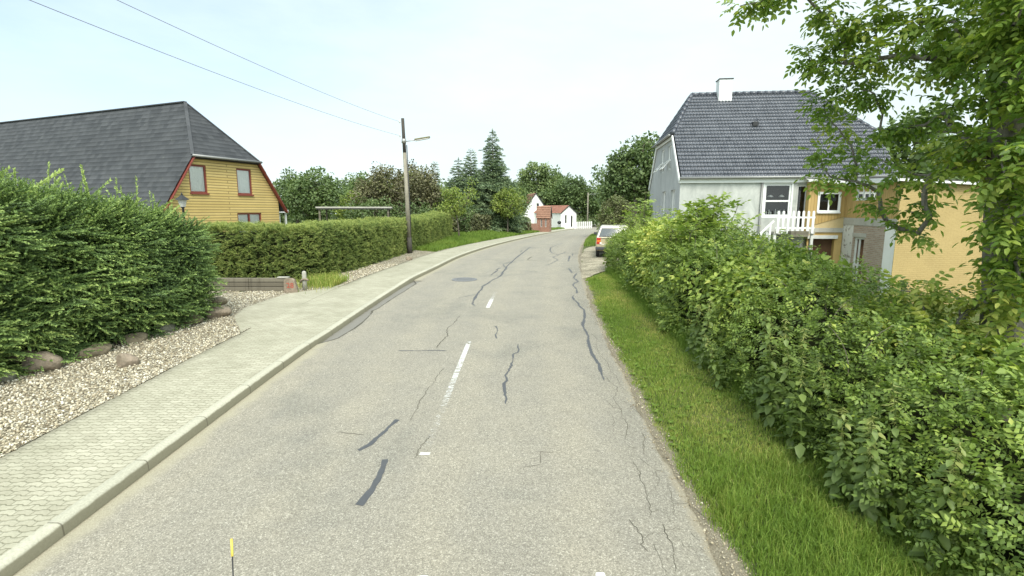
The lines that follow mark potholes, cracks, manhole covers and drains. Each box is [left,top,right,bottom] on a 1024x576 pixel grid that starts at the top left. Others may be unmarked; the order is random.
crack [585,311,712,572]
crack [411,368,444,458]
